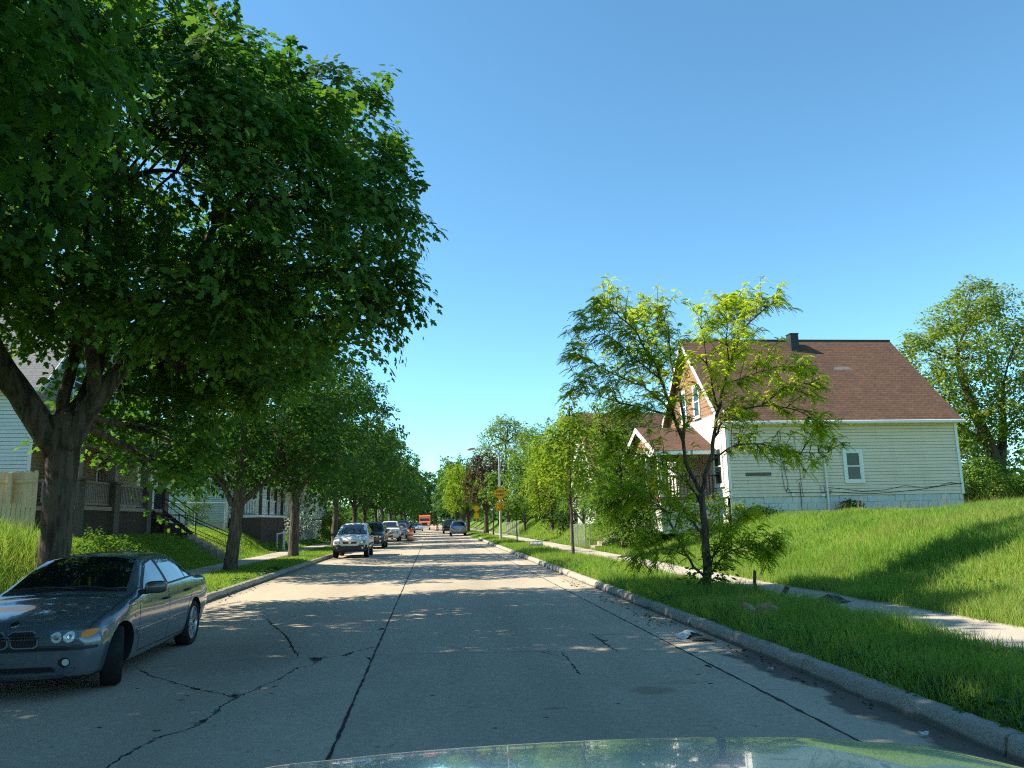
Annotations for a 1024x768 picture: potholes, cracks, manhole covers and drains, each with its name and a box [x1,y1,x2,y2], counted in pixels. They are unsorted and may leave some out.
crack [590,633,617,651]
crack [106,618,373,768]
